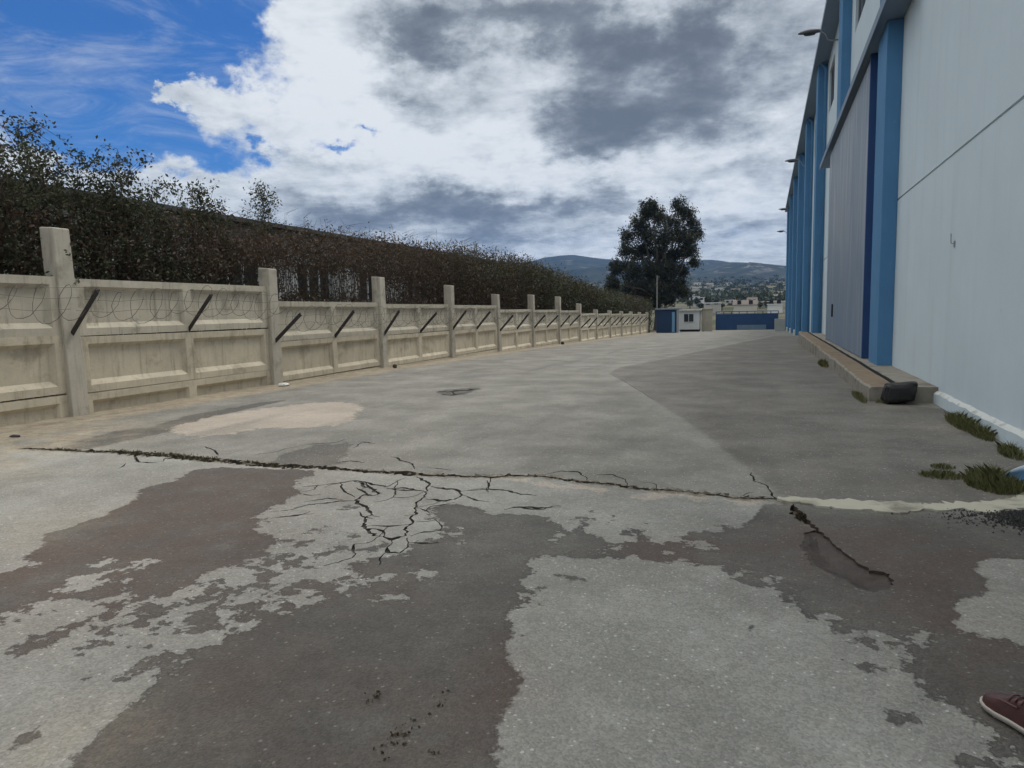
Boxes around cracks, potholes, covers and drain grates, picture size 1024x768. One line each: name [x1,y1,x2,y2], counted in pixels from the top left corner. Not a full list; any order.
crack [75,440,819,566]
pothole [799,530,894,593]
